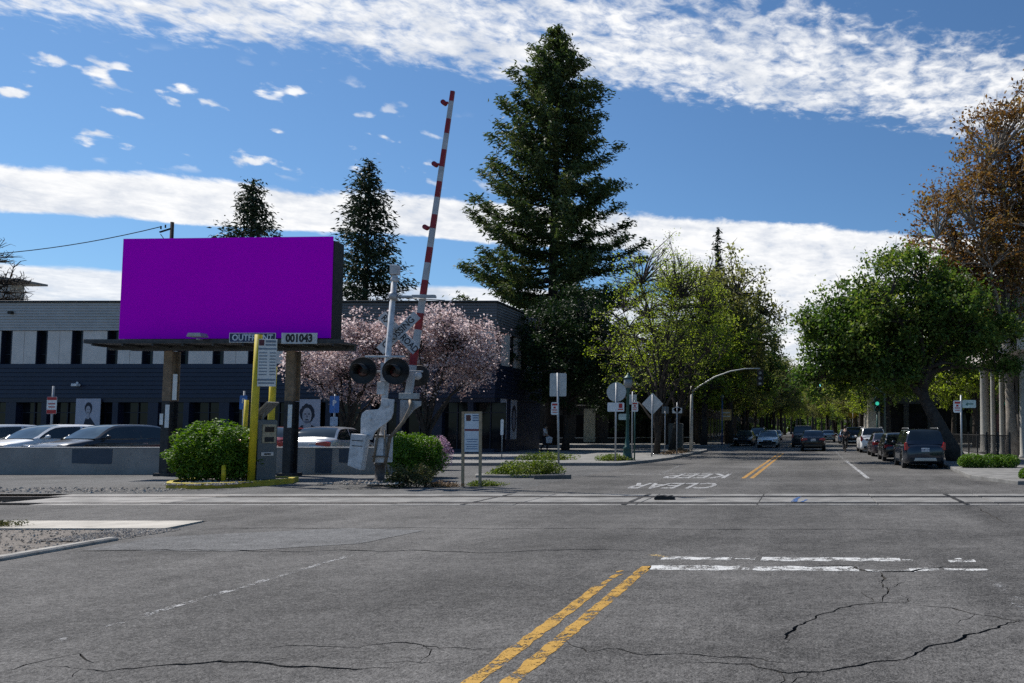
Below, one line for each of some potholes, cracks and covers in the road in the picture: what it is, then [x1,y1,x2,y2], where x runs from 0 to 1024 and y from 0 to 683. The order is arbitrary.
crack [565,565,1024,683]
crack [4,642,490,683]
